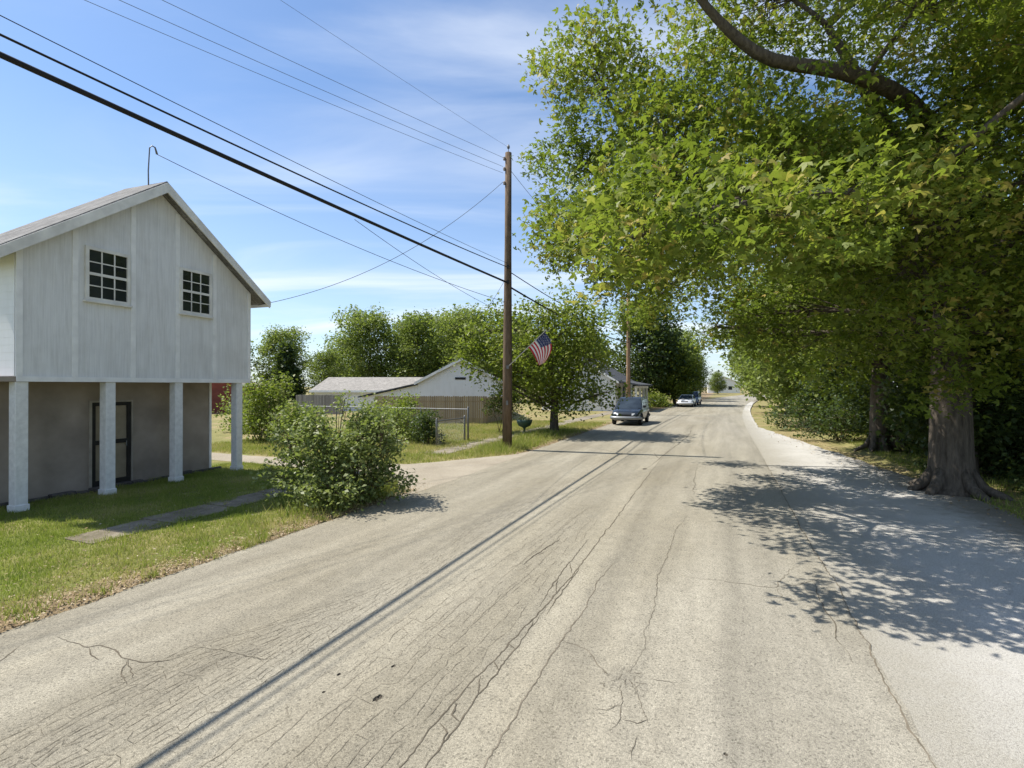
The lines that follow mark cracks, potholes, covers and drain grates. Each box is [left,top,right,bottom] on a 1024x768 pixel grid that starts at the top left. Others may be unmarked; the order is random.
crack [199,428,852,768]
crack [0,478,577,768]
